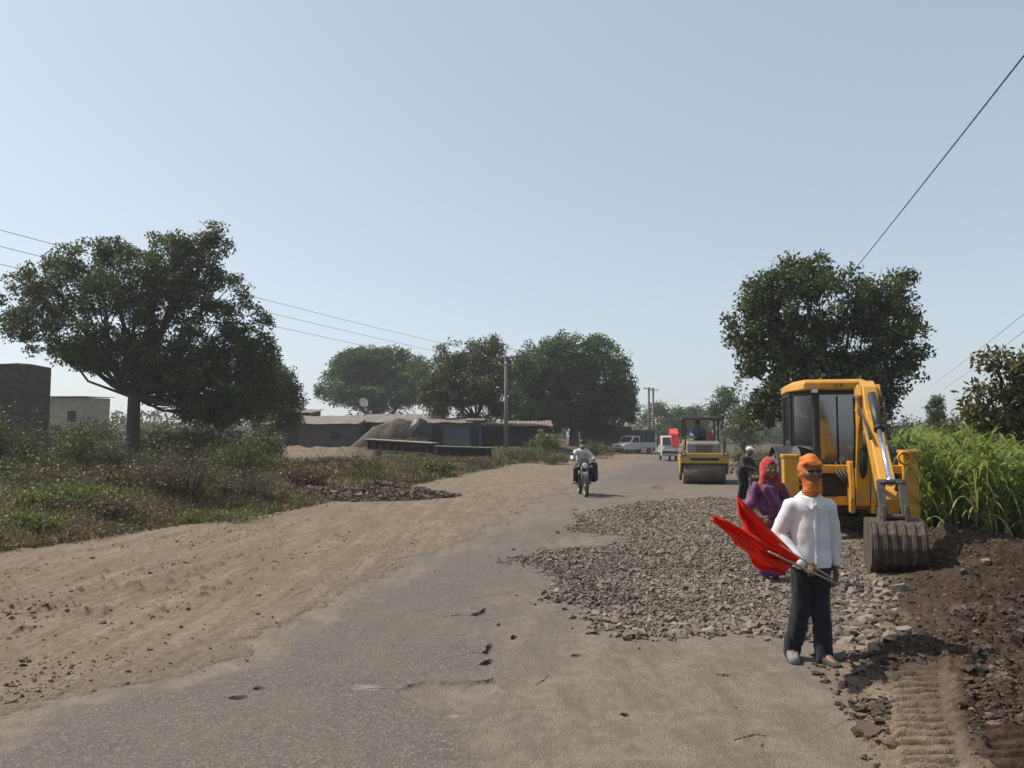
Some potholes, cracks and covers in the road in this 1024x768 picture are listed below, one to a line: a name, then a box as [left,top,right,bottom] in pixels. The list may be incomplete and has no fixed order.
pothole [395,677,503,713]
